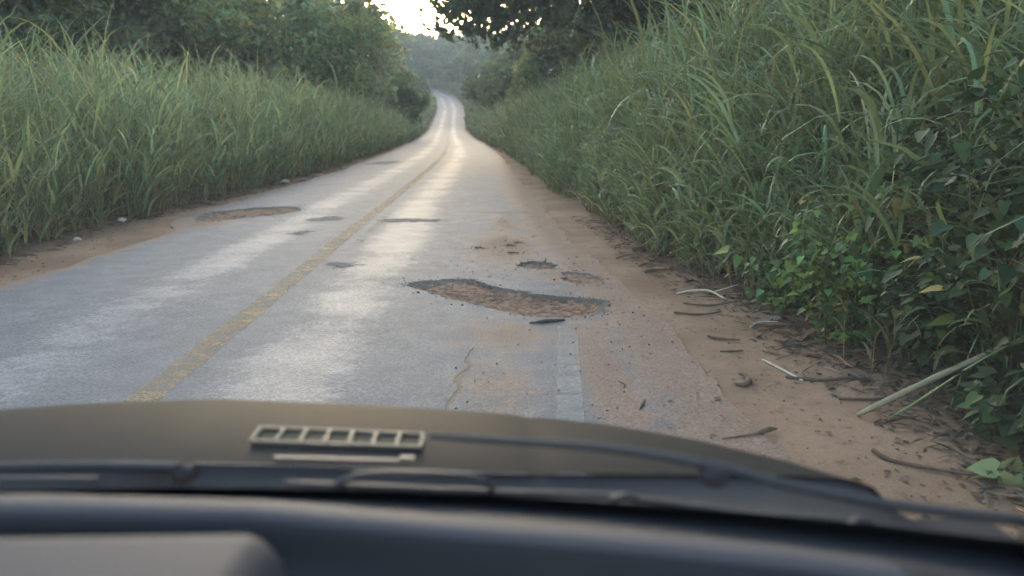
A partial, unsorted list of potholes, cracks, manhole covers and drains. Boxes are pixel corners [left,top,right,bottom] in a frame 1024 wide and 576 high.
pothole [504,259,574,271]
pothole [548,268,609,286]
pothole [188,206,300,223]
crack [444,348,475,410]
pothole [382,271,640,325]
